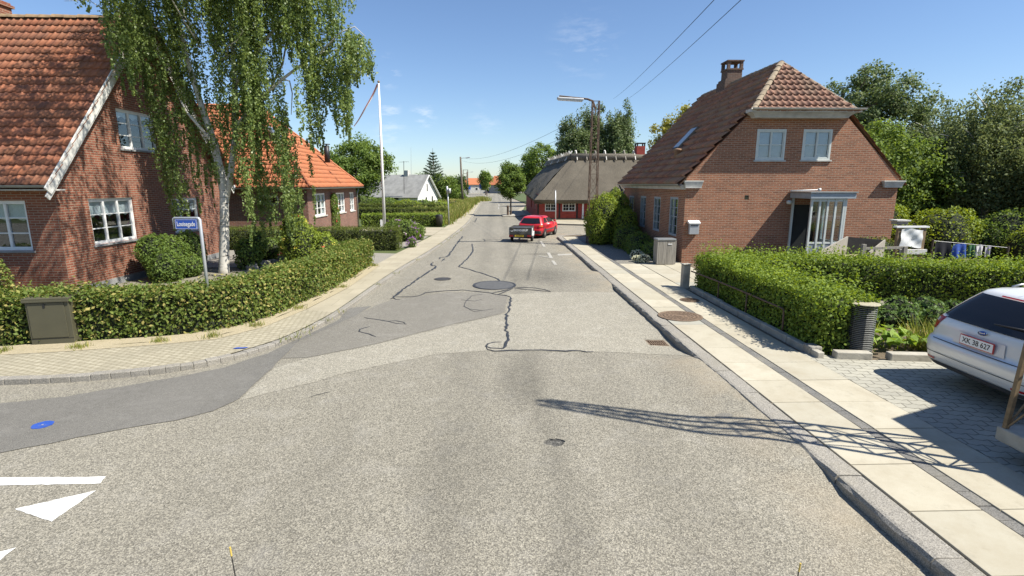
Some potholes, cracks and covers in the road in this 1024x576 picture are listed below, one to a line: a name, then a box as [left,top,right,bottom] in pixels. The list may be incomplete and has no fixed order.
manhole cover [657,311,703,321]
manhole cover [473,281,516,290]
